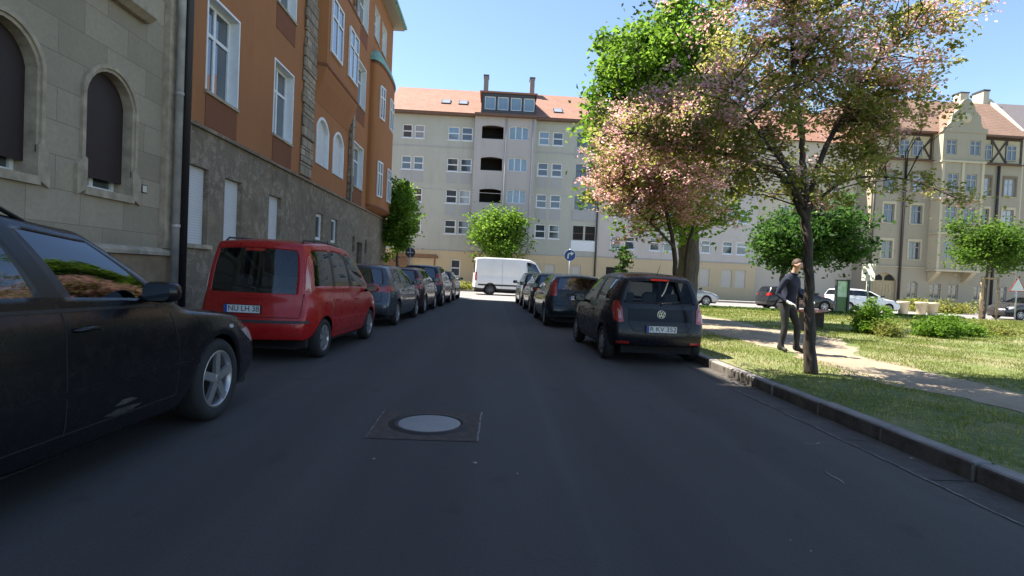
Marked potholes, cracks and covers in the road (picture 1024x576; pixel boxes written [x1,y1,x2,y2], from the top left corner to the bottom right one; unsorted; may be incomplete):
manhole cover [366,409,483,442]
